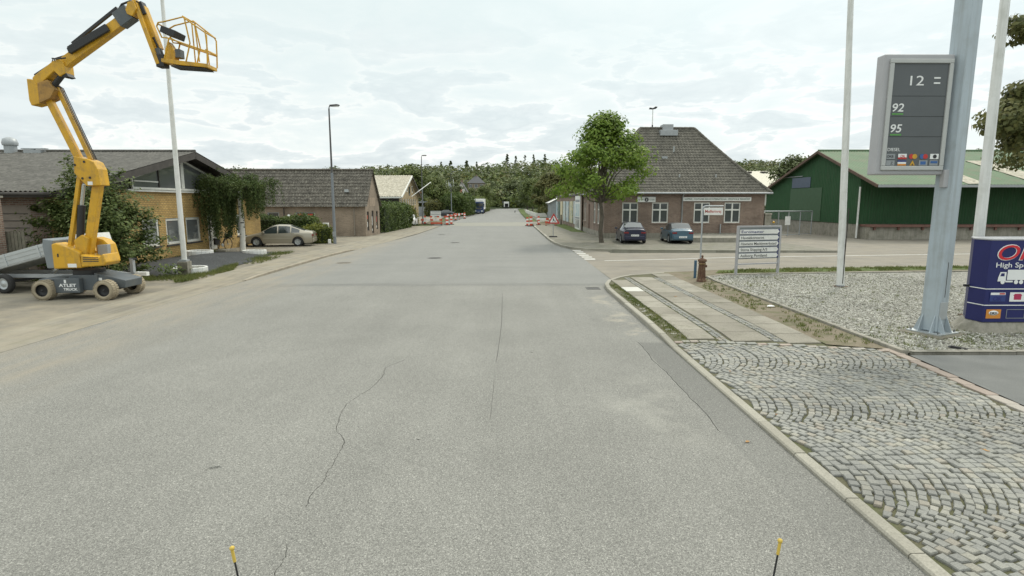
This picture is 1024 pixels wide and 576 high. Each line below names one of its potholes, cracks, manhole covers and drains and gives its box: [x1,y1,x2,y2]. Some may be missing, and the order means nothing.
crack [306,360,404,506]
